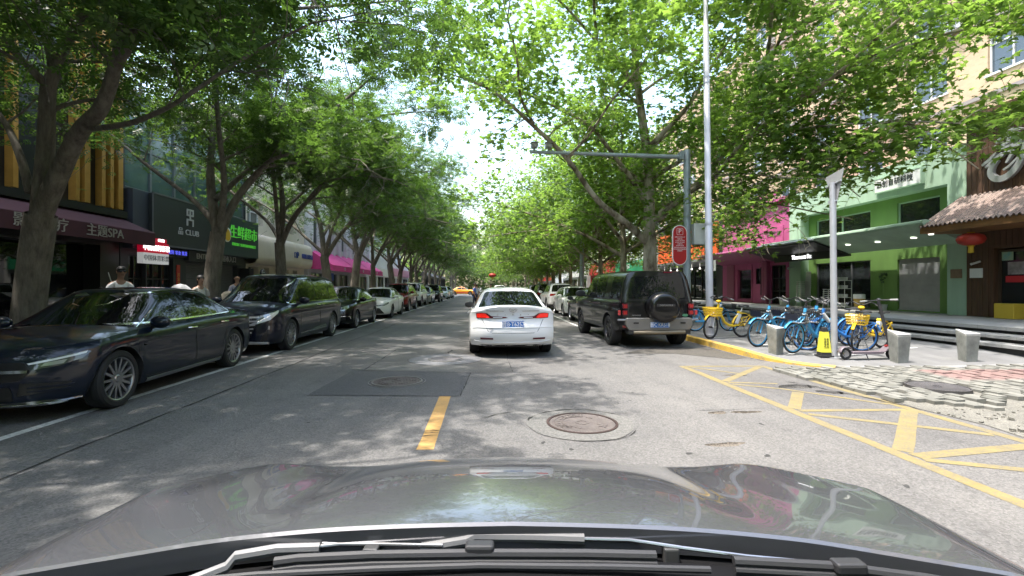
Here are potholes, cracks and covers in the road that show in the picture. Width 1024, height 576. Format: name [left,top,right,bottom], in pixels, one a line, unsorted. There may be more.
manhole cover [368,376,426,388]
manhole cover [526,410,634,441]
manhole cover [904,381,973,395]
